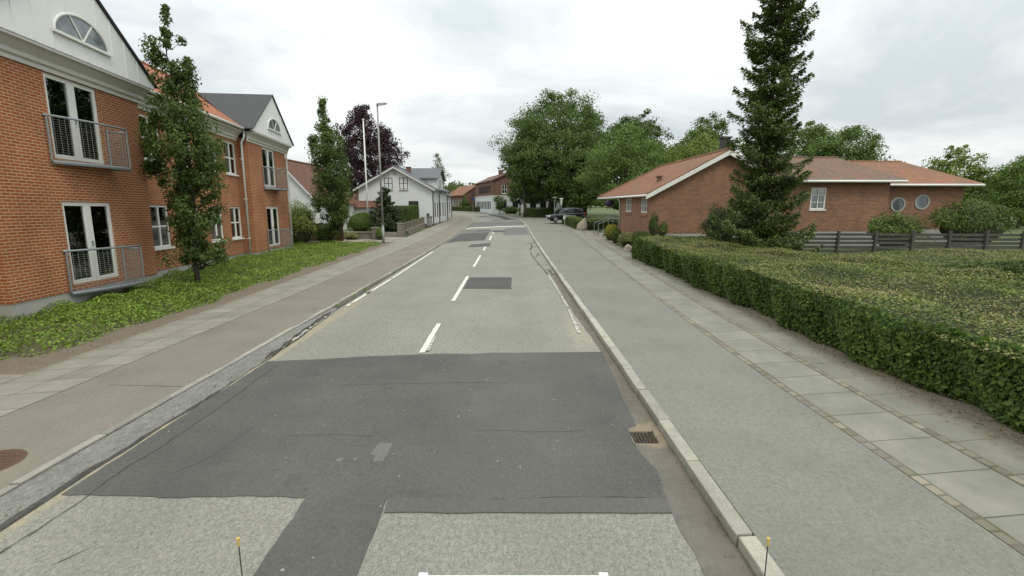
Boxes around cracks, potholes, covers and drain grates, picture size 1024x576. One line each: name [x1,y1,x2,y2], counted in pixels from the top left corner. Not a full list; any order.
manhole cover [0,449,28,471]
drain grate [629,430,661,445]
